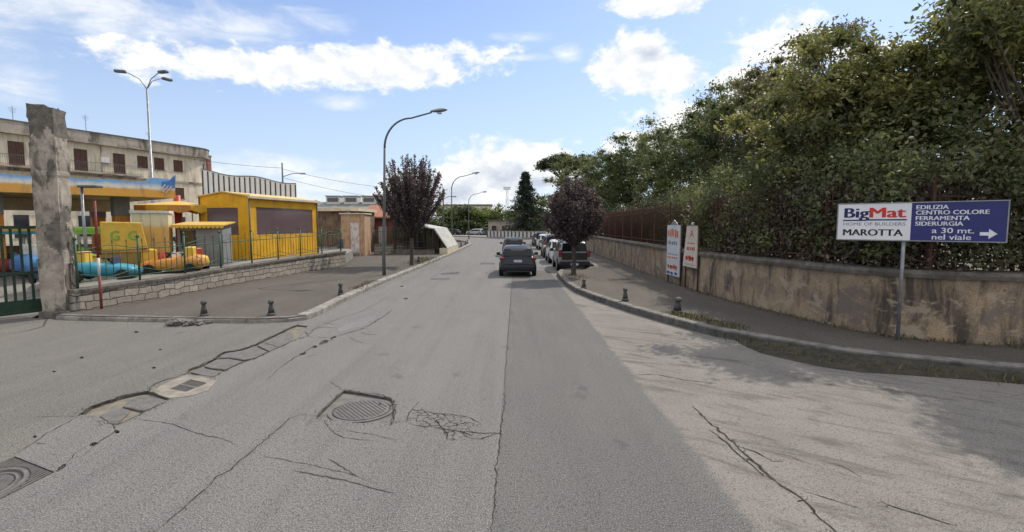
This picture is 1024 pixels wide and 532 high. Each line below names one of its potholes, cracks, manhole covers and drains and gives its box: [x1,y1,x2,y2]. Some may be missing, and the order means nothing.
crack [693,407,859,532]
crack [22,312,389,450]
crack [139,382,500,530]
